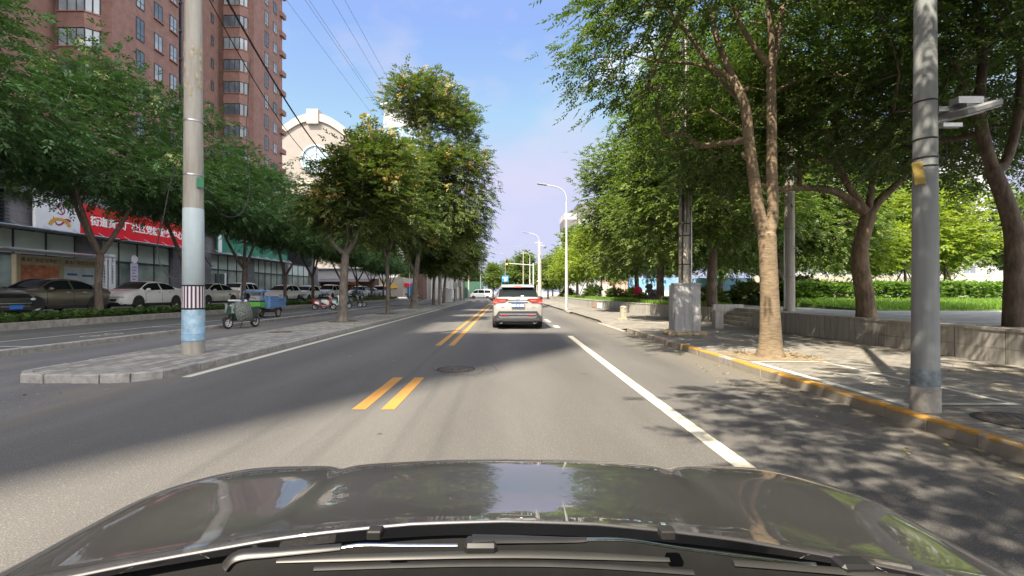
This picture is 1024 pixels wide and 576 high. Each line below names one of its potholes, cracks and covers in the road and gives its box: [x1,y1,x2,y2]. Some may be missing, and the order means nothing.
manhole cover [970,411,1024,429]
